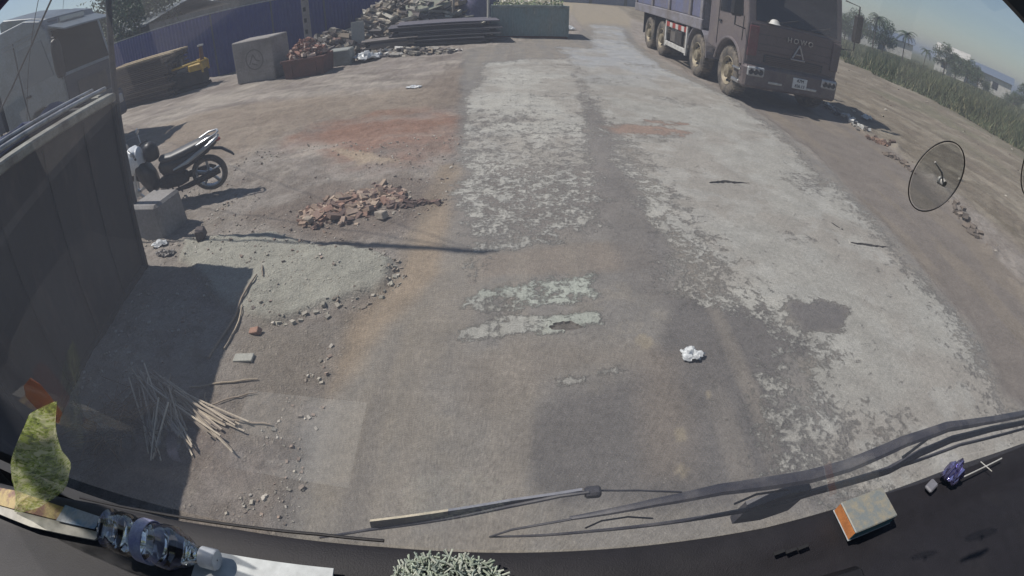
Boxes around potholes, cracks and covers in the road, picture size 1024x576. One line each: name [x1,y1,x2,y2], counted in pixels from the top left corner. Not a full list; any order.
pothole [542,317,589,335]
crack [829,222,890,250]
